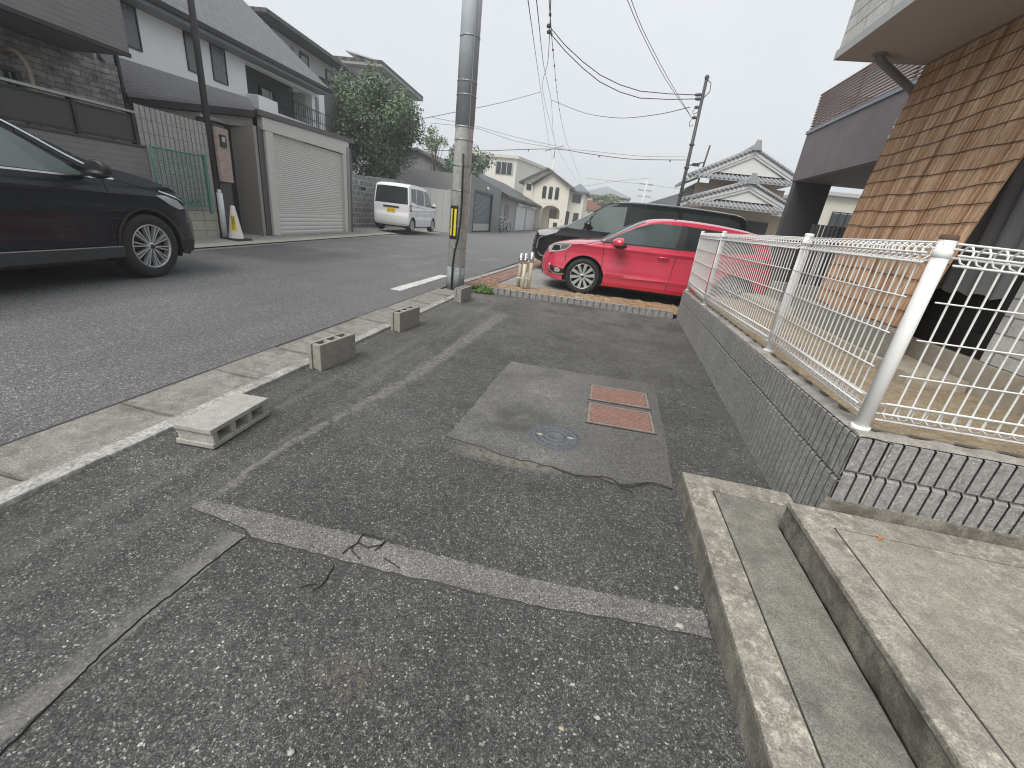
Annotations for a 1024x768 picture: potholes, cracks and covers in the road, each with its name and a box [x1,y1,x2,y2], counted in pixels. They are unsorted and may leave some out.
manhole cover [585,402,657,435]
crack [551,466,673,492]
crack [300,534,400,591]
manhole cover [528,424,582,451]
manhole cover [588,384,651,410]
